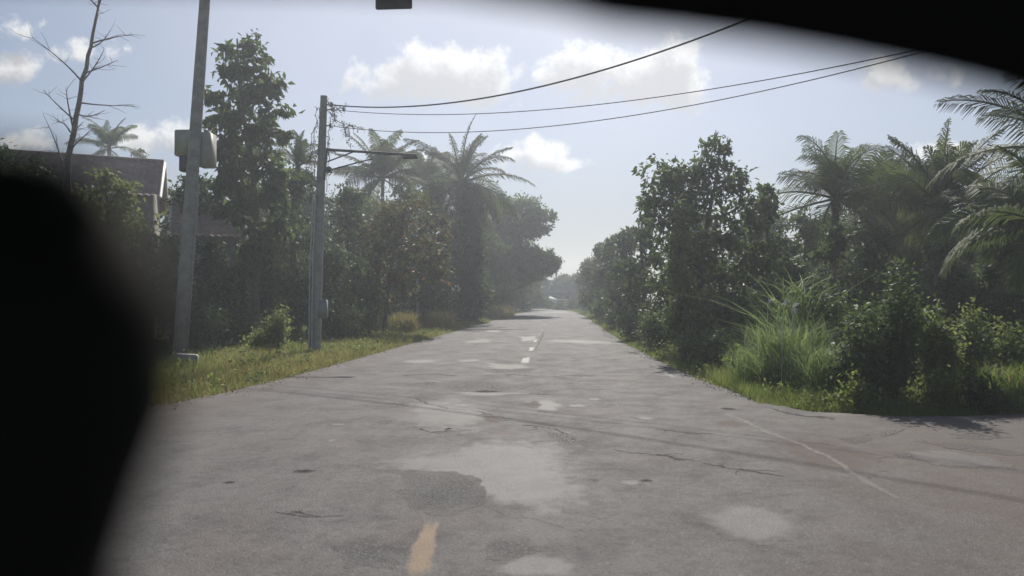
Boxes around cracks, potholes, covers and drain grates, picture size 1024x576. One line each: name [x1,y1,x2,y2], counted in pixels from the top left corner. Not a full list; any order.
crack [413,398,569,435]
crack [614,449,780,476]
